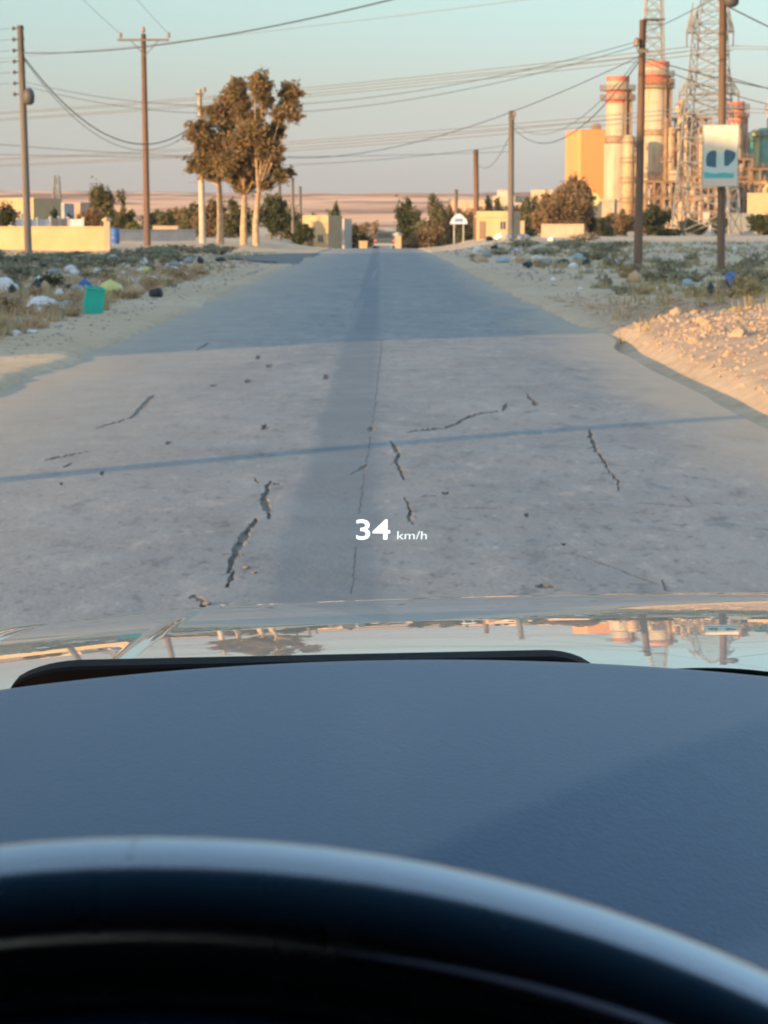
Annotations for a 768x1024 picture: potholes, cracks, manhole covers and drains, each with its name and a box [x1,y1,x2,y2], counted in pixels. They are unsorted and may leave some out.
crack [562,552,669,591]
crack [390,403,508,525]
crack [223,477,281,588]
crack [96,395,155,429]
crack [587,429,620,491]
crack [45,451,91,468]
